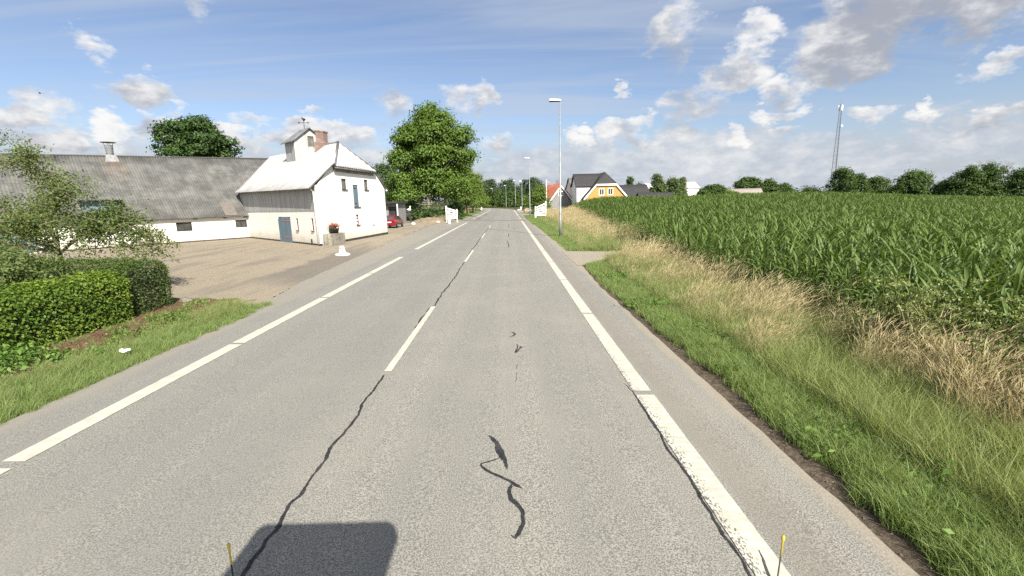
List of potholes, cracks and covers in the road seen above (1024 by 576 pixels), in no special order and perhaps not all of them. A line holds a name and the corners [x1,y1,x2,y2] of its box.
crack [480,436,525,539]
